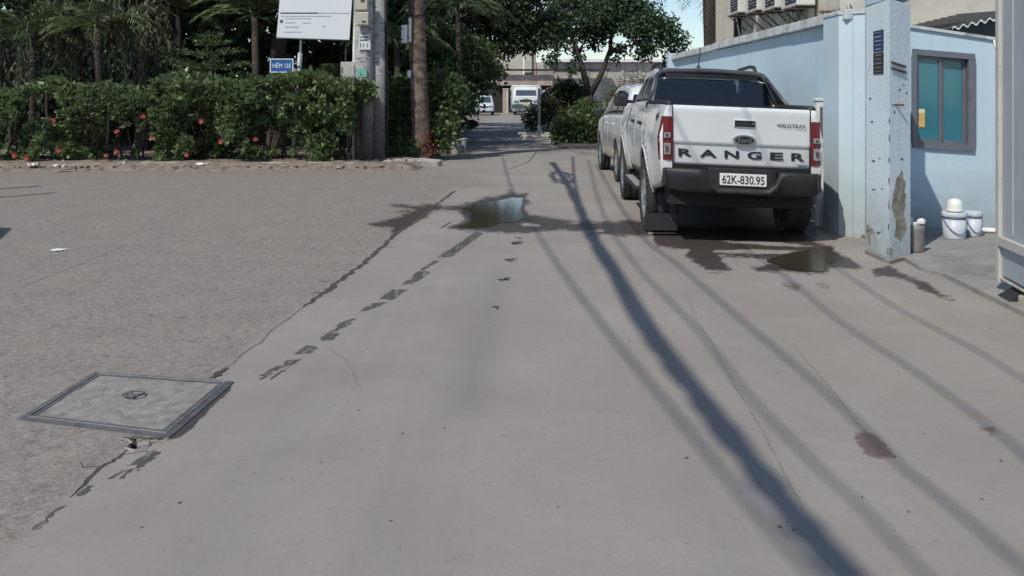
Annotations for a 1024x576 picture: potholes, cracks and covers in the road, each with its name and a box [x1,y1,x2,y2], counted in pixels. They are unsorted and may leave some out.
pothole [117,436,169,452]
crack [686,293,868,510]
manhole cover [18,372,234,438]
crack [328,346,360,387]
